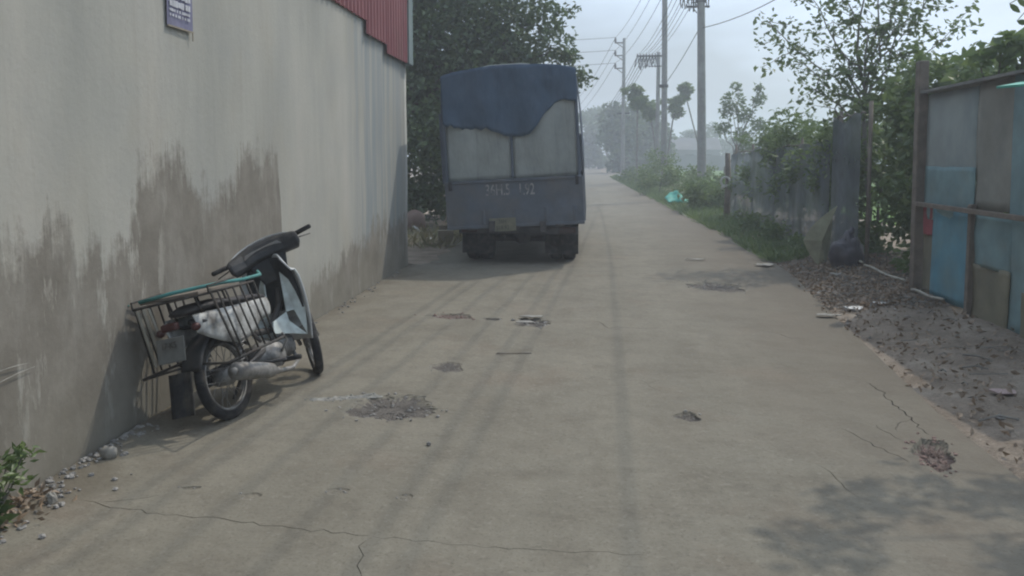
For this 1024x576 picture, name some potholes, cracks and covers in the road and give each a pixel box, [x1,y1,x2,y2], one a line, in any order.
crack [848,383,929,463]
pothole [511,317,551,329]
crack [85,495,639,576]
pothole [903,432,958,477]
pothole [672,409,702,422]
pothole [324,392,448,422]
pothole [429,362,464,373]
pothole [239,492,263,500]
